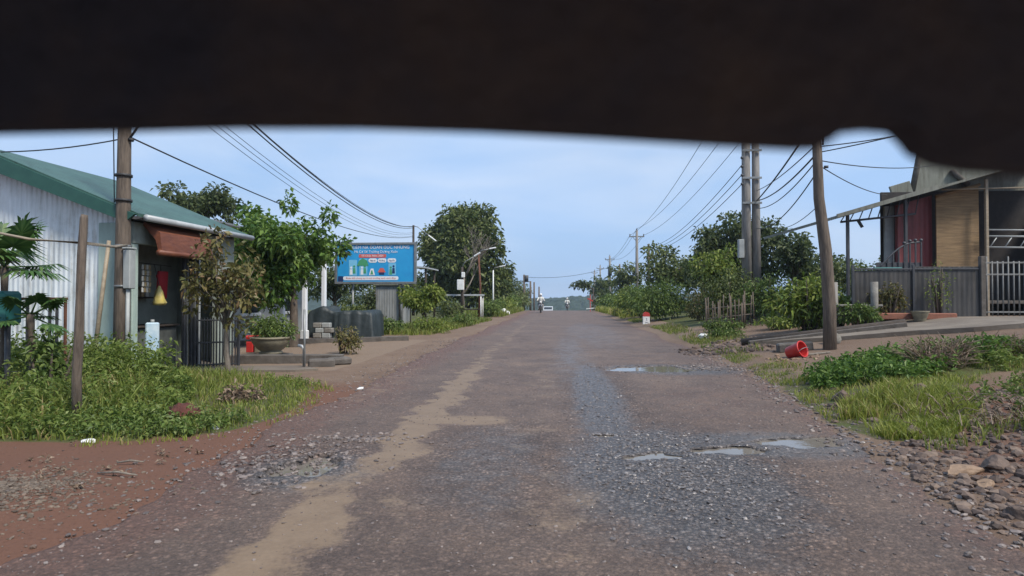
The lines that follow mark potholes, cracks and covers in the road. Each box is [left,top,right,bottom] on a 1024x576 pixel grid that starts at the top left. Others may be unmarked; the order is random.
pothole [731,434,862,454]
pothole [596,365,707,374]
pothole [665,442,788,460]
pothole [603,448,708,465]
pothole [236,449,361,485]
